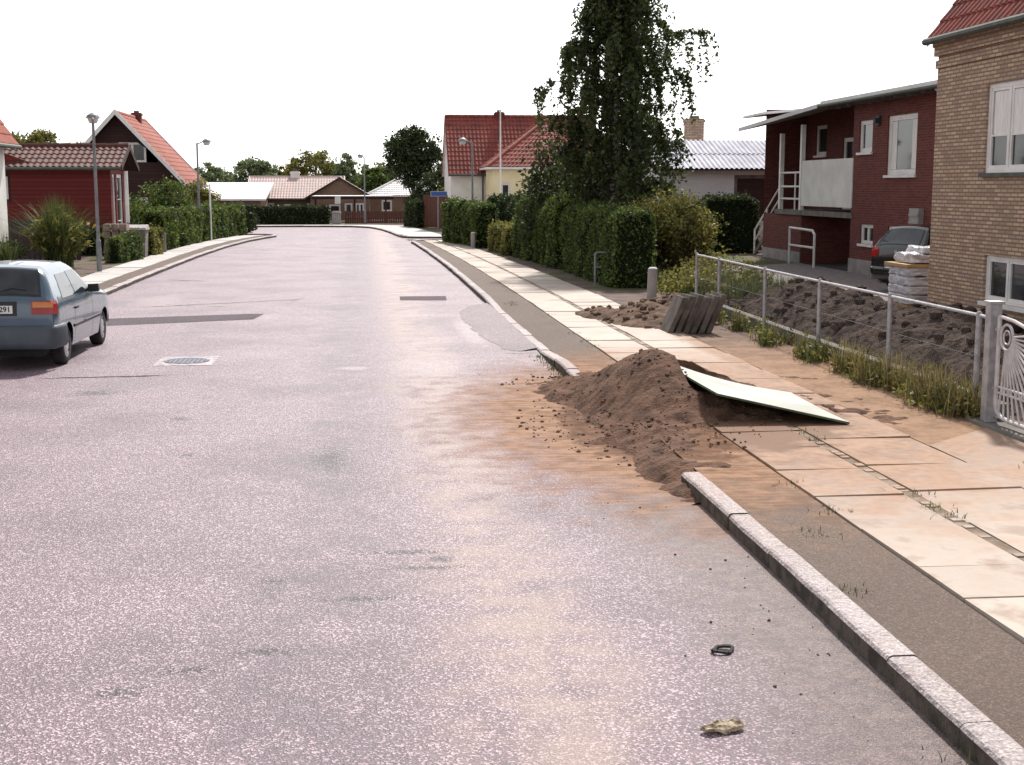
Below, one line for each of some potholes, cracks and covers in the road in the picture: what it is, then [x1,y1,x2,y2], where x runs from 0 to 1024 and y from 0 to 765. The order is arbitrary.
manhole cover [153,356,219,366]
